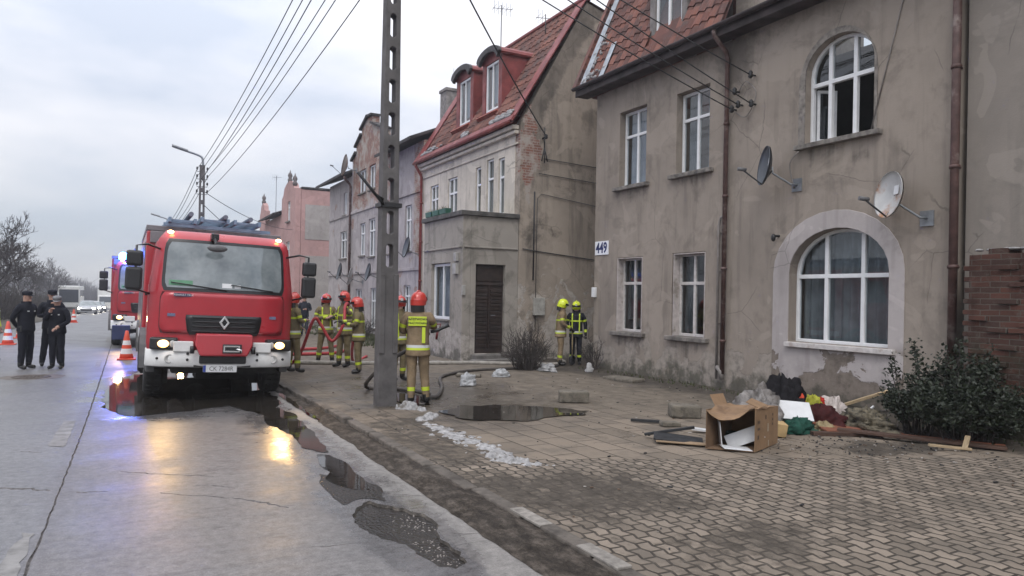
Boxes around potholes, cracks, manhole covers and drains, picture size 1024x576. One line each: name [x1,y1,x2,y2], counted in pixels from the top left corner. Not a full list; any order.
crack [128,472,289,508]
pothole [353,504,465,569]
